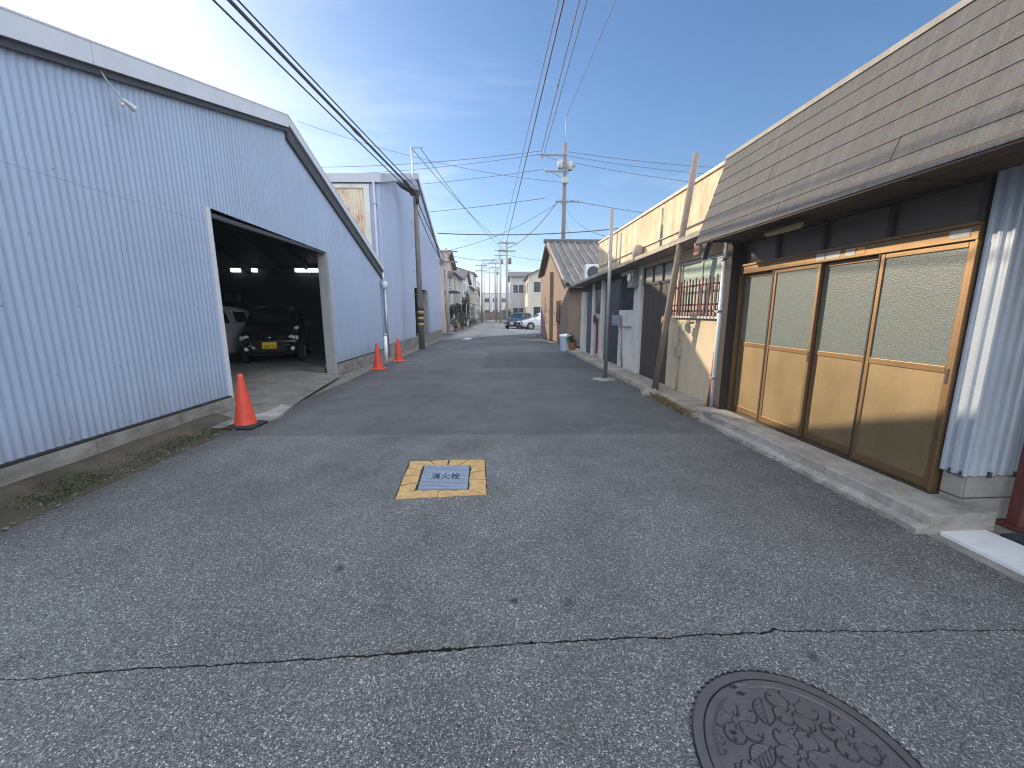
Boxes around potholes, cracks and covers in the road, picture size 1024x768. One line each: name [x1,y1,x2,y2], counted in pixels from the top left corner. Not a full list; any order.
manhole cover [395,459,487,500]
crack [0,628,1024,681]
manhole cover [689,669,923,768]
